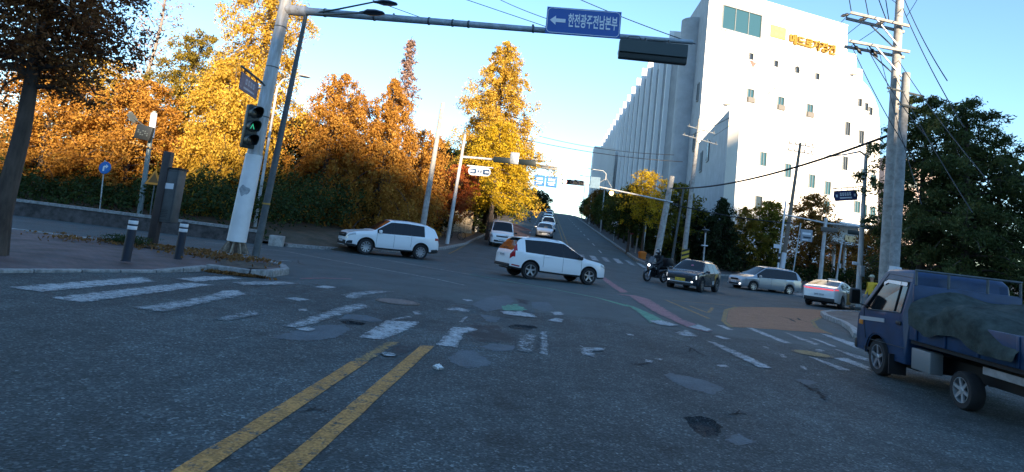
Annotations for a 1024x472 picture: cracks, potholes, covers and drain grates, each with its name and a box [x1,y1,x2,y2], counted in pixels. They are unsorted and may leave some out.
pothole [682,416,724,437]
crack [800,382,828,400]
